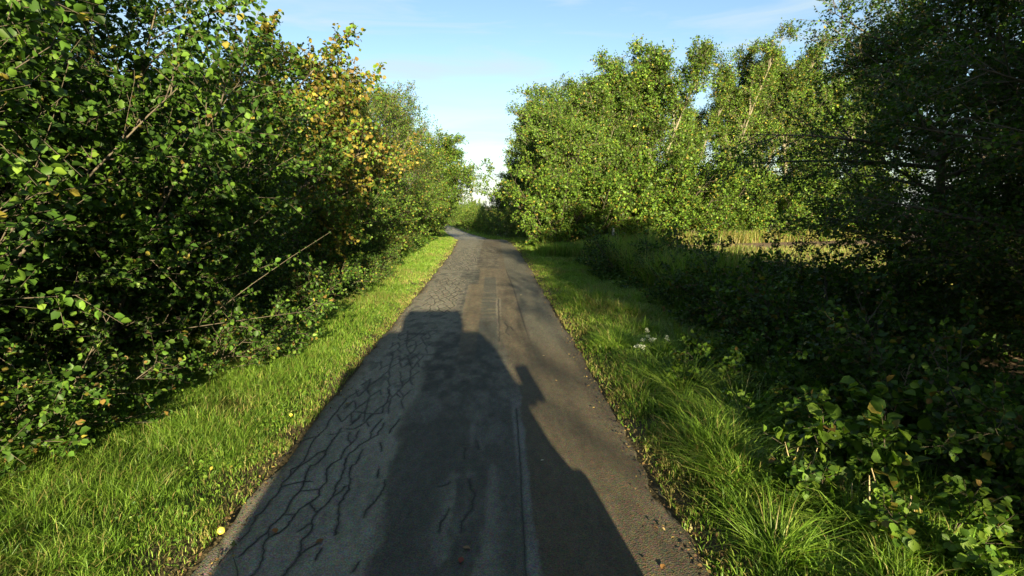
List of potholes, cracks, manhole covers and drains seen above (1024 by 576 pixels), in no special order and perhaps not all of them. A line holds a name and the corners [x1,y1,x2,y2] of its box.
crack [438,480,475,532]
crack [427,251,477,313]
crack [339,331,430,450]
crack [217,389,390,576]
